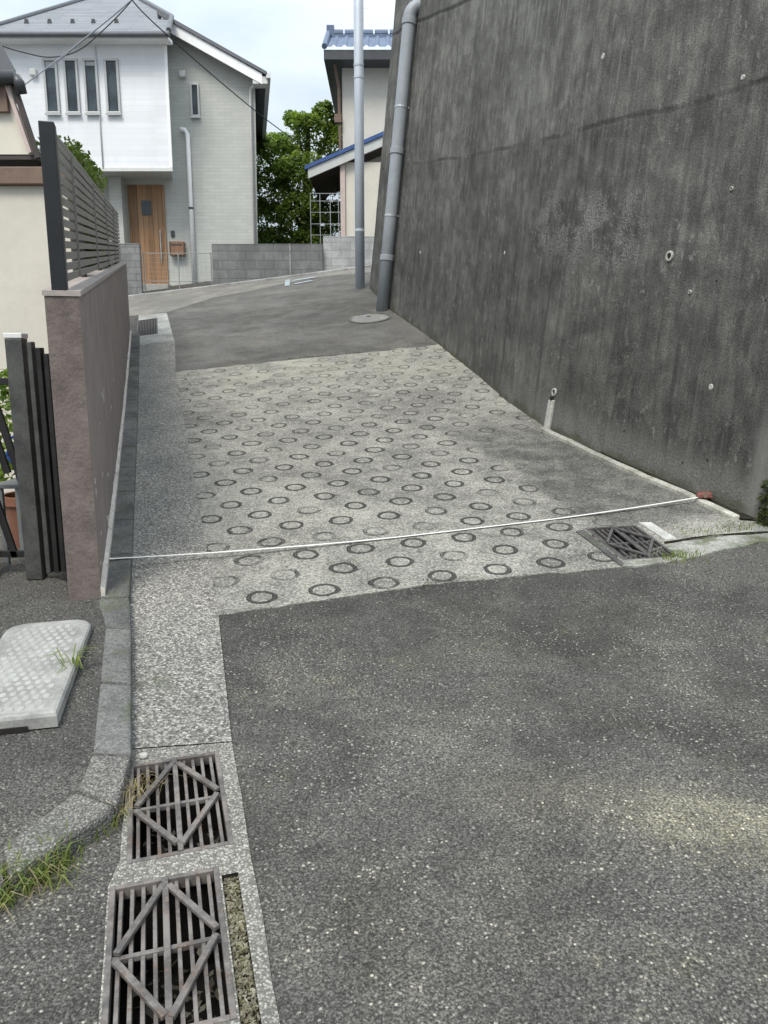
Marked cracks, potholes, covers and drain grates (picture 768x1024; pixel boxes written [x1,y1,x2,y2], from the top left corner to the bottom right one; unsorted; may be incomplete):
drain grate [136,318,158,336]
drain grate [127,751,234,864]
manhole cover [348,313,391,324]
drain grate [586,525,677,560]
drain grate [101,867,237,1024]
